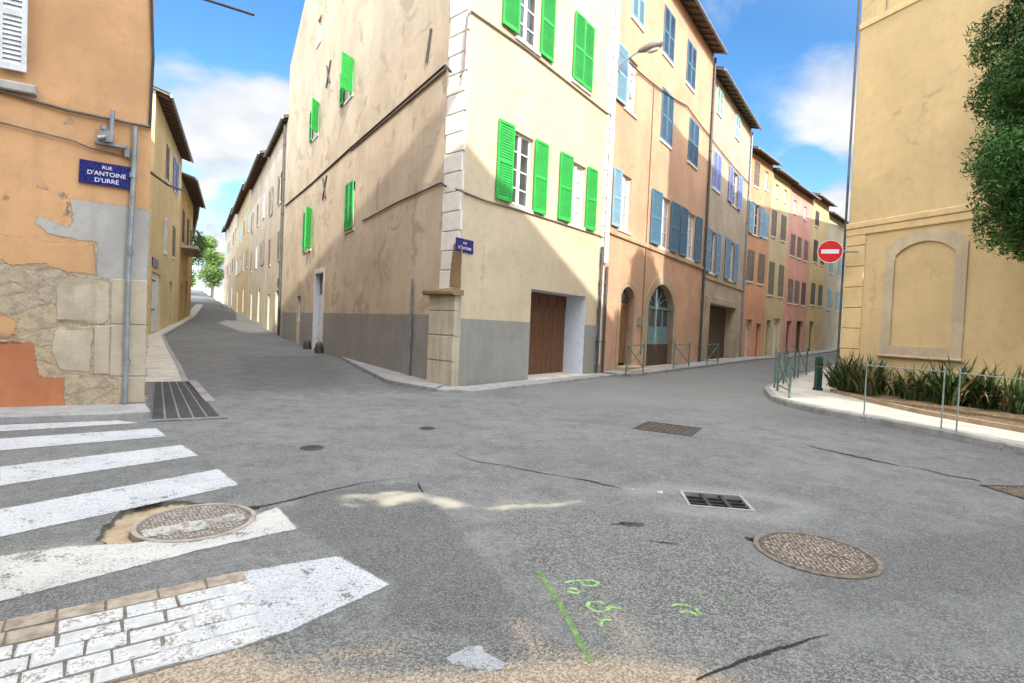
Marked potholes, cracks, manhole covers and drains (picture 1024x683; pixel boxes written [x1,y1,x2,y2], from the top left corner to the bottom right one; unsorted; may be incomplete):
crack [696,634,829,680]
manhole cover [980,485,1024,499]
crack [459,455,623,489]
manhole cover [130,503,256,545]
manhole cover [753,531,884,580]
crack [807,445,980,481]
manhole cover [632,421,702,436]
pothole [96,500,205,544]
drain grate [148,381,228,423]
drain grate [679,490,756,512]
